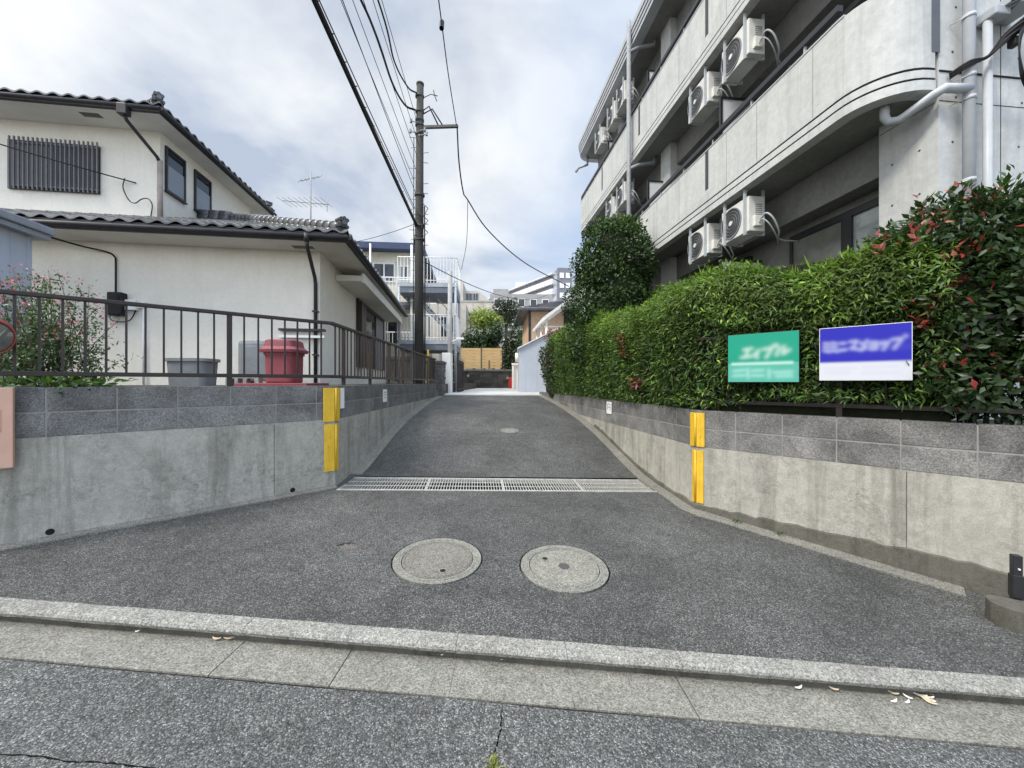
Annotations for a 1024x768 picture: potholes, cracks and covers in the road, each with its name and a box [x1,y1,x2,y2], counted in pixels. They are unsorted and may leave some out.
drain grate [502,479,582,490]
crack [493,706,503,768]
manhole cover [519,545,611,594]
crack [0,754,155,768]
drain grate [574,480,653,491]
drain grate [426,479,504,490]
drain grate [339,478,430,489]
manhole cover [391,538,483,586]
